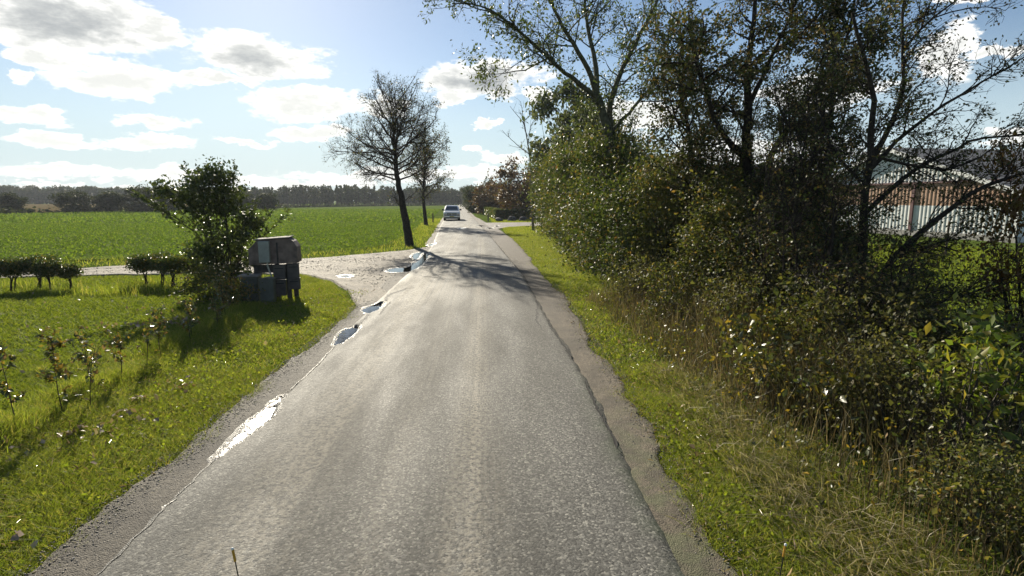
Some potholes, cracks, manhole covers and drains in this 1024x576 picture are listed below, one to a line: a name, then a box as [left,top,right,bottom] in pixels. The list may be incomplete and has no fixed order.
pothole [264,393,288,408]
pothole [206,402,283,464]
pothole [330,324,363,347]
pothole [384,252,432,273]
pothole [359,301,386,314]
